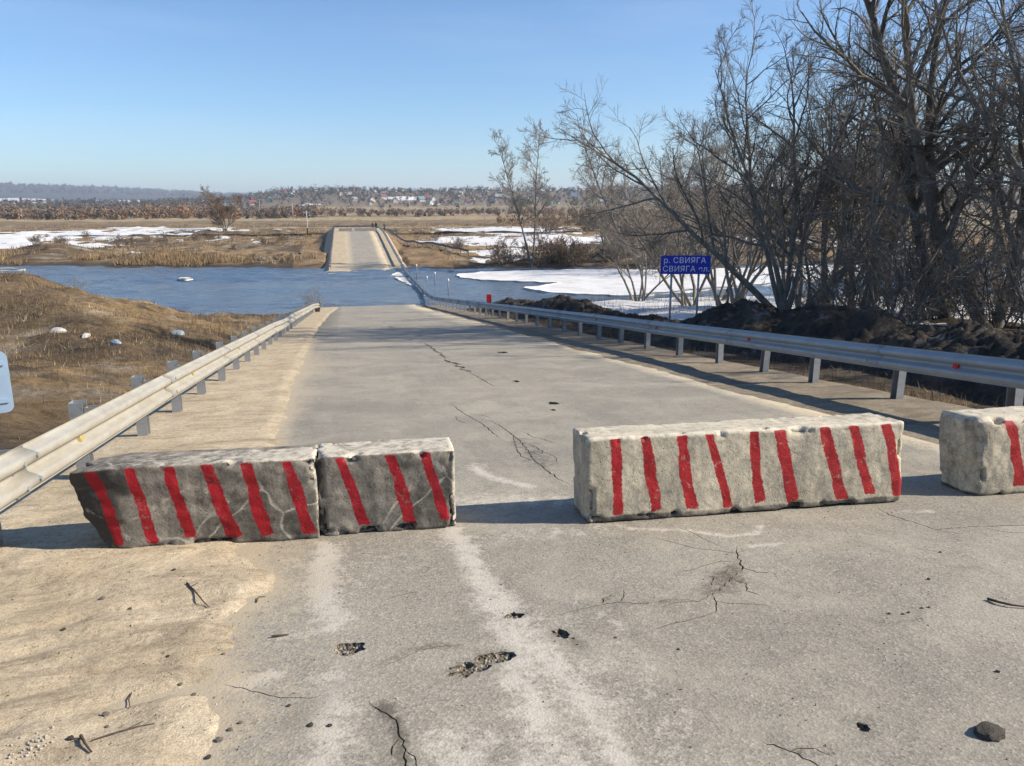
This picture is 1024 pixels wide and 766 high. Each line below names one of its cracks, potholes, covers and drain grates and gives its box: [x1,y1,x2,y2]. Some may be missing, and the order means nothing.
crack [454,406,567,483]
crack [228,685,322,699]
pothole [445,651,516,678]
crack [649,526,768,631]
crack [557,591,646,615]
crack [763,742,828,766]
crack [879,509,1018,534]
crack [369,702,417,766]
pothole [551,629,570,639]
pothole [333,642,366,656]
